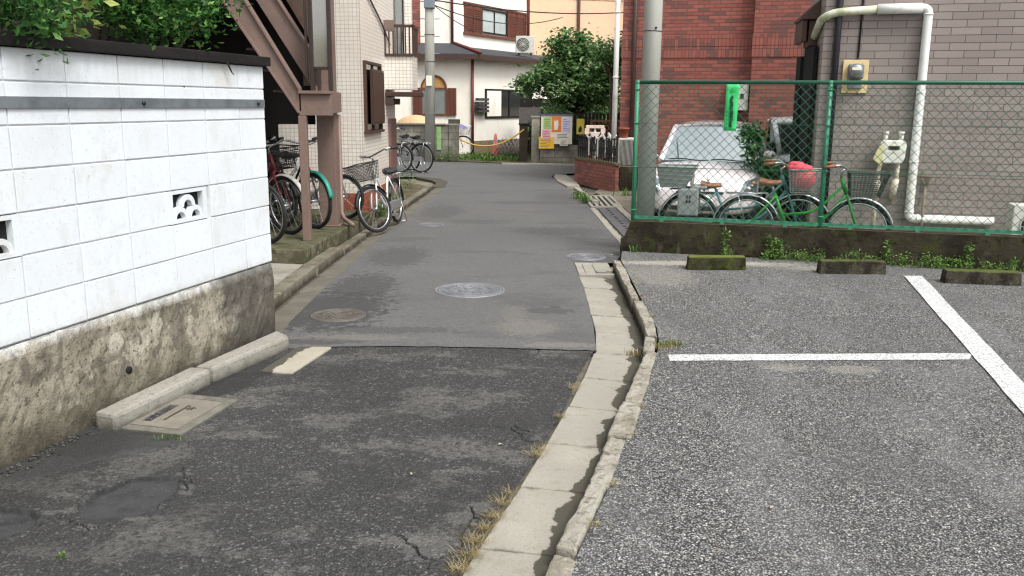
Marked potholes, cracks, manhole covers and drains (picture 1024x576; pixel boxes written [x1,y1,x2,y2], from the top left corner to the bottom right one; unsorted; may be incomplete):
pothole [0,506,45,539]
manhole cover [434,283,505,298]
pothole [75,475,183,524]
crack [394,505,490,569]
manhole cover [310,308,366,322]
drain grate [587,195,623,209]
manhole cover [565,253,606,261]
